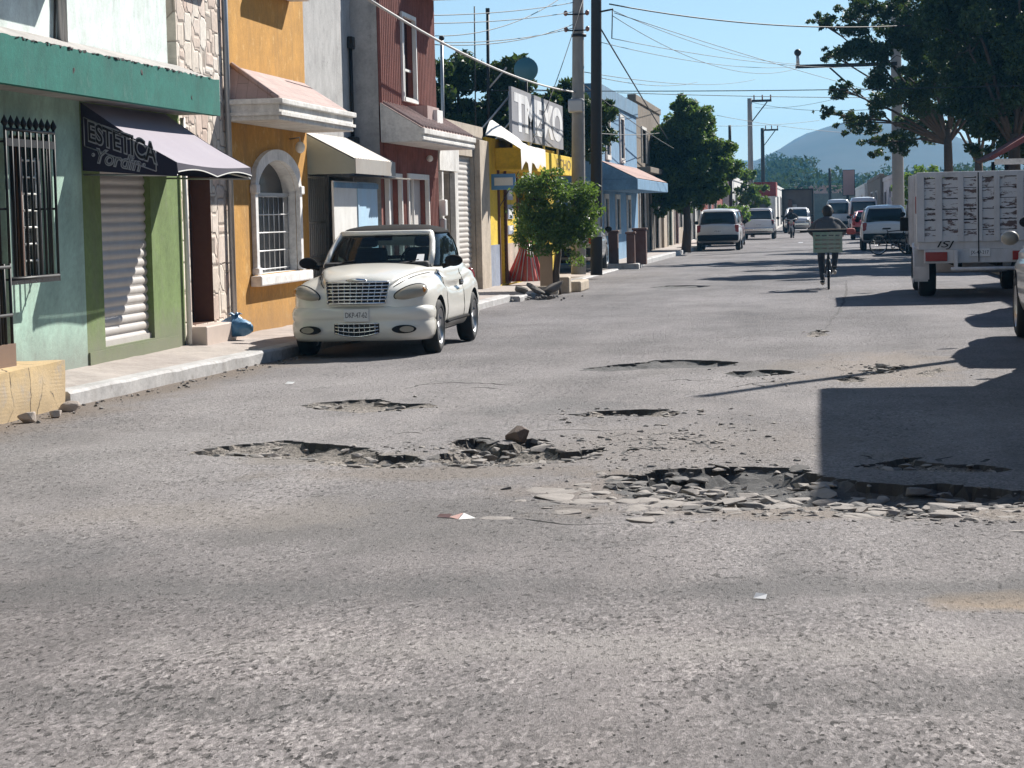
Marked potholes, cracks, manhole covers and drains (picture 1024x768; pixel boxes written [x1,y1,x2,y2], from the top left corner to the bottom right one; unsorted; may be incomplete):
pothole [479,464,1024,533]
pothole [579,360,742,372]
pothole [566,409,681,418]
crack [825,280,848,329]
pothole [835,363,946,383]
pothole [427,437,608,468]
pothole [187,440,426,469]
pothole [854,455,1013,473]
pothole [301,399,436,413]
